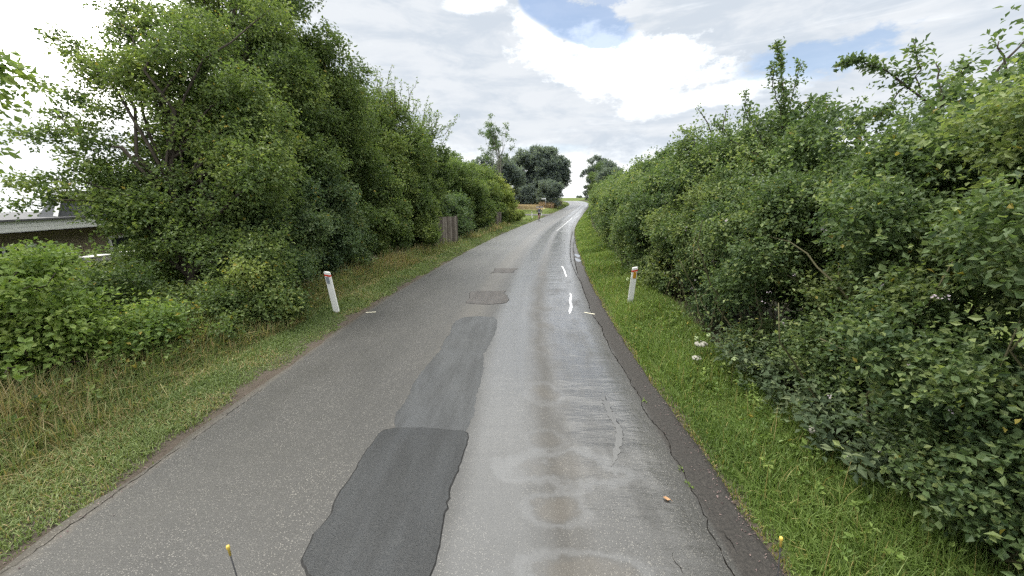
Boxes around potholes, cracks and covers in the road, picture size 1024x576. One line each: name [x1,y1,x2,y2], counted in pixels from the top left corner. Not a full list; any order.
crack [561,232,735,576]
